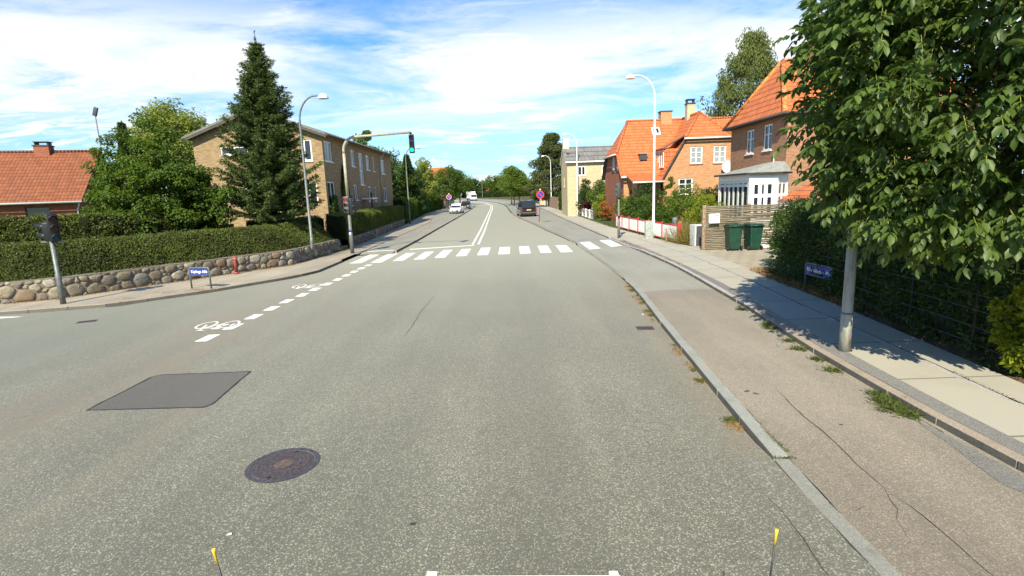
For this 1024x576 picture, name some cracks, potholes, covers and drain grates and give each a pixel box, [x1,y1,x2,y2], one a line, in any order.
manhole cover [244,448,320,483]
crack [776,389,992,575]
